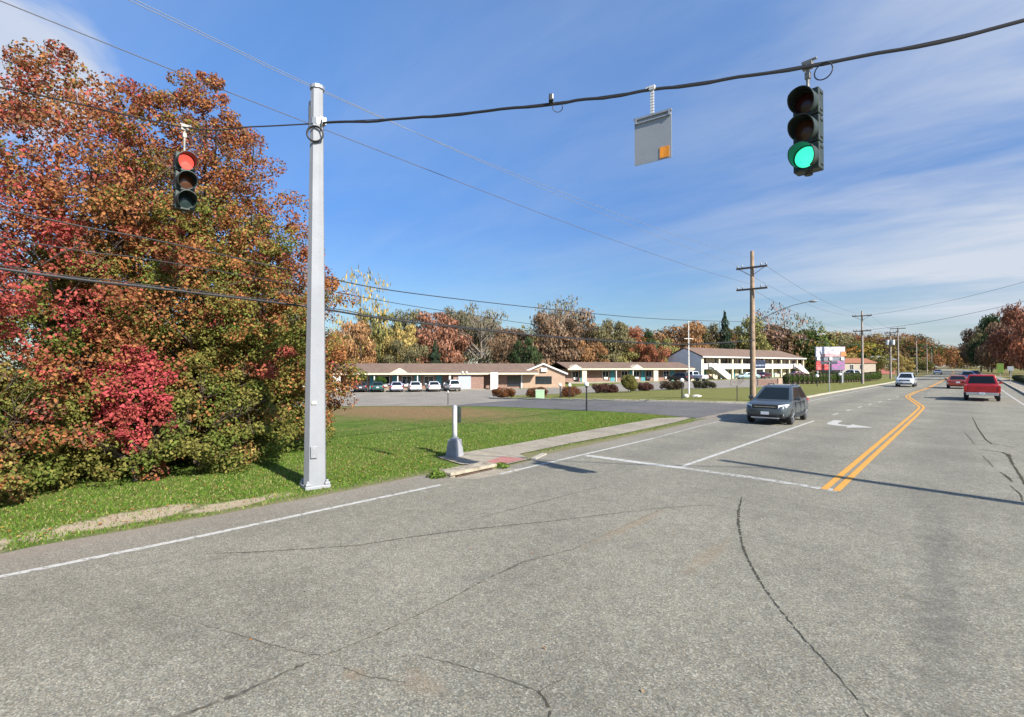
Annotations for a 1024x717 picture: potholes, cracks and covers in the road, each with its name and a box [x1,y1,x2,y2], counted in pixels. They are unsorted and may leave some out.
crack [737,497,869,717]
crack [967,417,1024,501]
crack [174,505,670,717]
